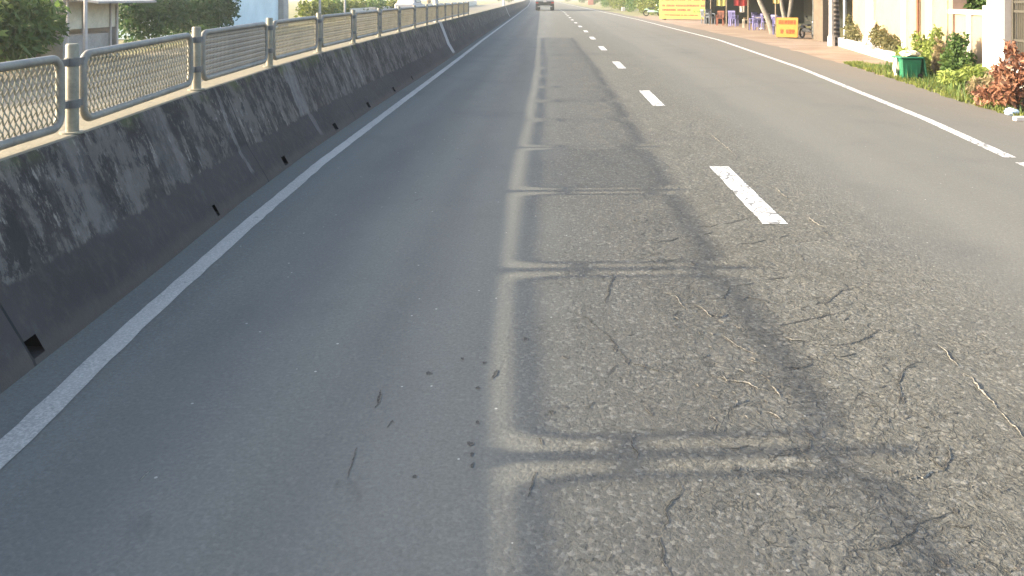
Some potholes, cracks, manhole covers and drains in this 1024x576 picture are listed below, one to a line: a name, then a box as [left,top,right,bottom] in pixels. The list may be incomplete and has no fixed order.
crack [672,254,888,422]
crack [856,345,1024,438]
crack [576,271,670,374]
crack [375,390,394,428]
crack [849,446,1009,552]
crack [659,465,698,576]
